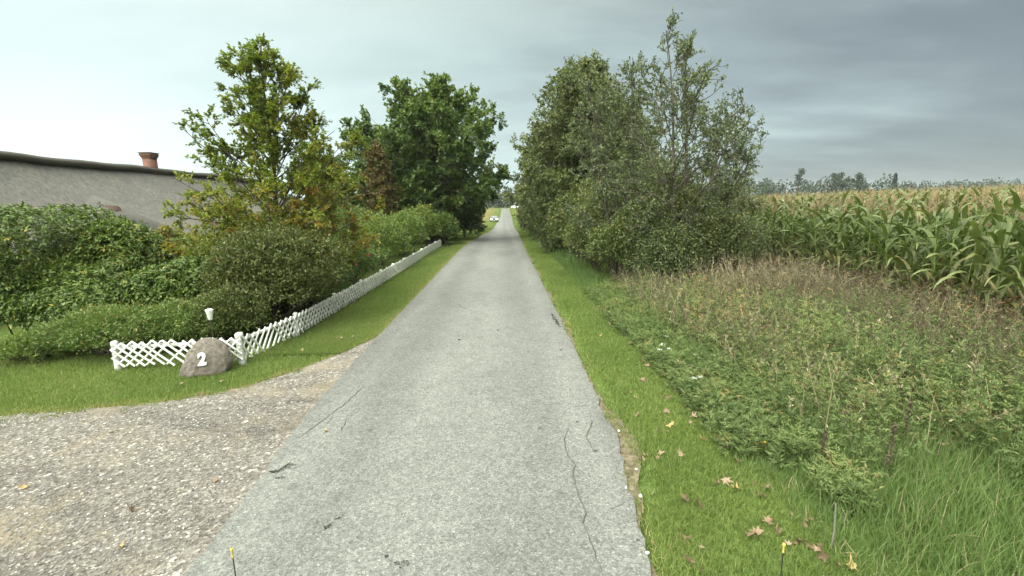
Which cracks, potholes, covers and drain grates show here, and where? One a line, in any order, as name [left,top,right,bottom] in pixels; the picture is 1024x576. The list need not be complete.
crack [295,387,364,447]
crack [555,402,624,573]
